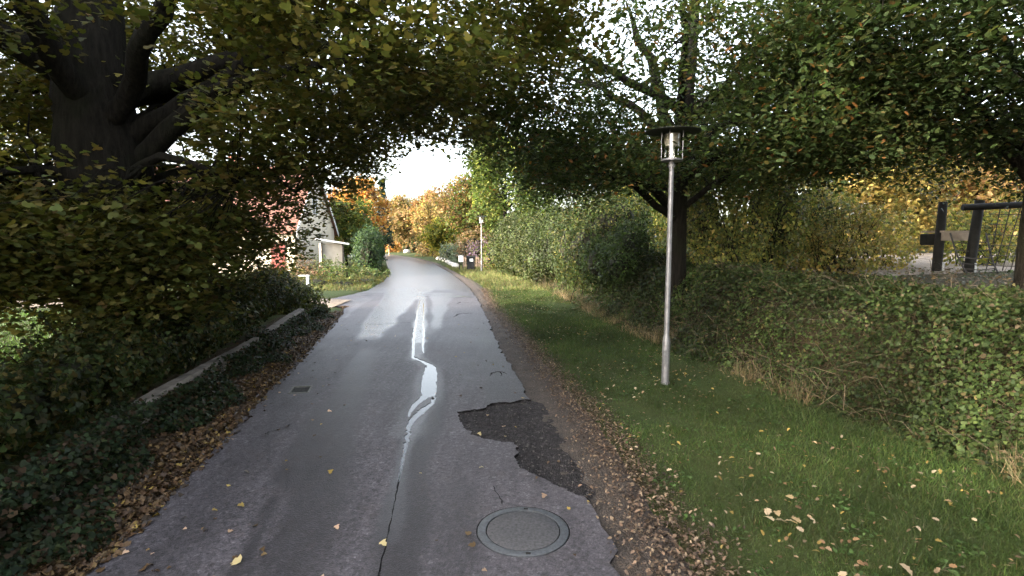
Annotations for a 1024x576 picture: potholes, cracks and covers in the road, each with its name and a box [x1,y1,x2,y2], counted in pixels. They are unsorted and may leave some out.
crack [378,305,437,576]
pothole [459,399,596,502]
manhole cover [476,507,570,557]
